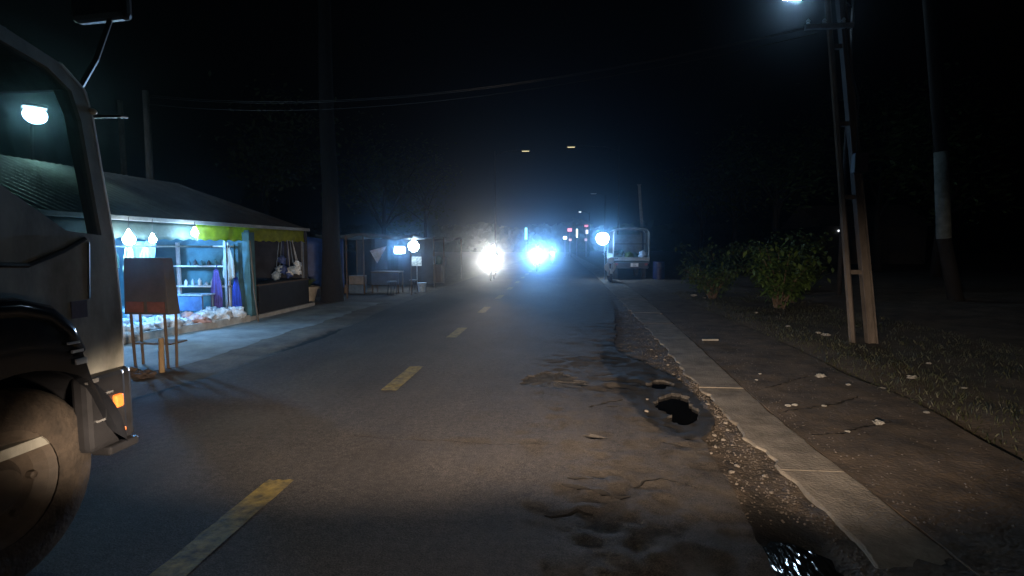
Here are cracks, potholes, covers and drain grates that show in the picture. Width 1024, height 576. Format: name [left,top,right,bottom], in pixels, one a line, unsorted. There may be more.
crack [782,395,858,412]
crack [544,476,696,518]
pothole [645,380,674,389]
crack [589,374,623,407]
crack [812,420,893,435]
pothole [652,393,700,425]
